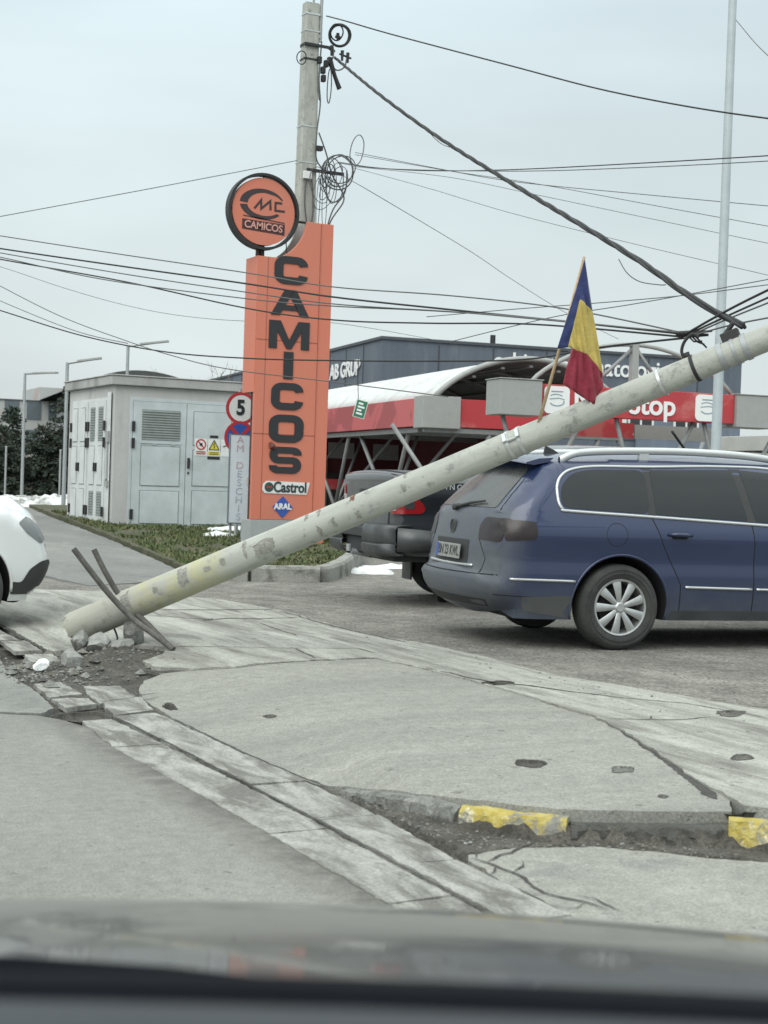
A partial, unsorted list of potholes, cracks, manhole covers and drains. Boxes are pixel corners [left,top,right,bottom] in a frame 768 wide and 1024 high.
crack [408,665,763,799]
pothole [725,812,756,820]
pothole [49,711,112,726]
crack [471,841,618,910]
pothole [515,759,547,768]
